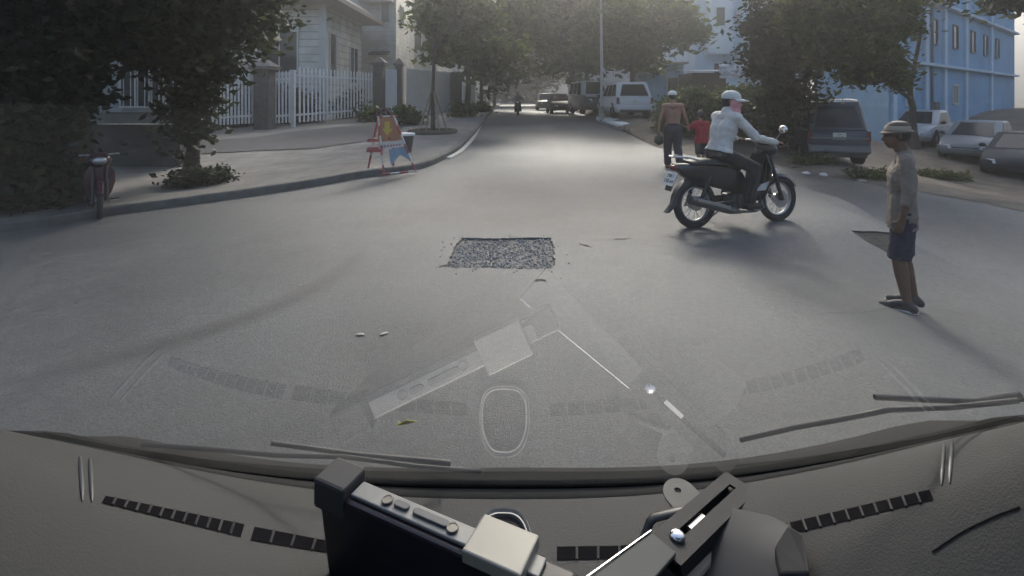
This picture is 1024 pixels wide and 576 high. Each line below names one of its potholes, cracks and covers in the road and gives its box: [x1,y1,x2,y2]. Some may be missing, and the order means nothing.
pothole [437,234,570,279]
